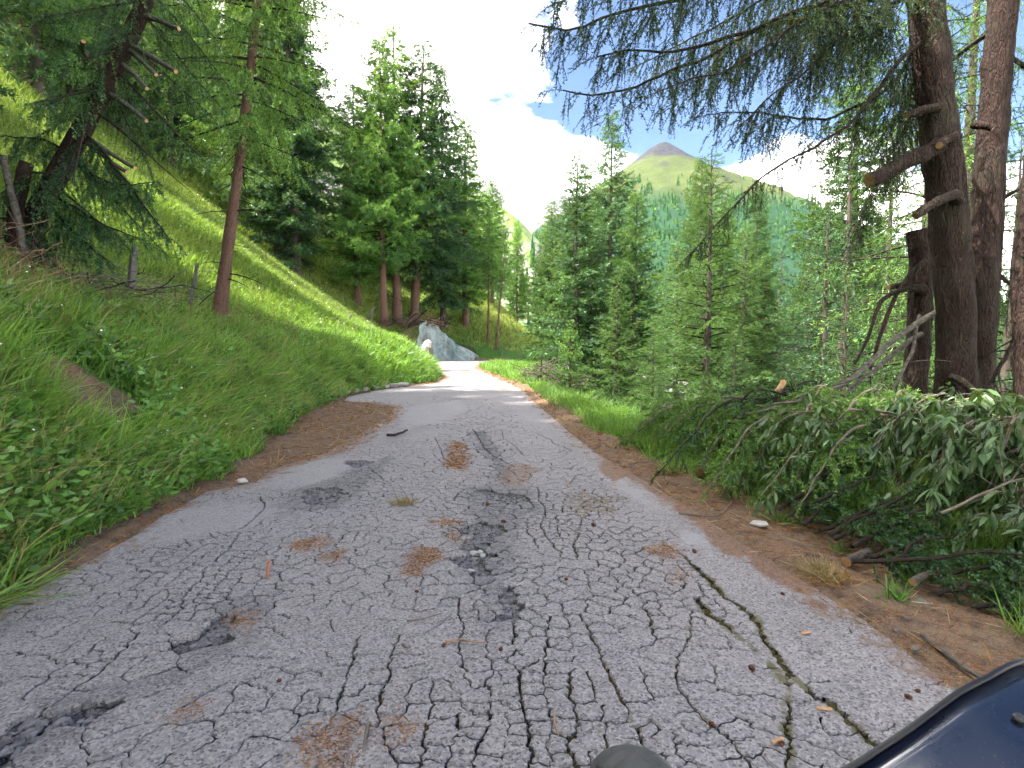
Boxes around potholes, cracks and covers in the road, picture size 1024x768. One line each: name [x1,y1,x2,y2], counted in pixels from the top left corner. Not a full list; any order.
pothole [0,705,118,768]
pothole [171,617,236,669]
crack [19,477,402,768]
crack [293,529,864,768]
pothole [448,524,506,581]
pothole [304,489,345,506]
pothole [477,491,529,505]
pothole [487,590,524,631]
